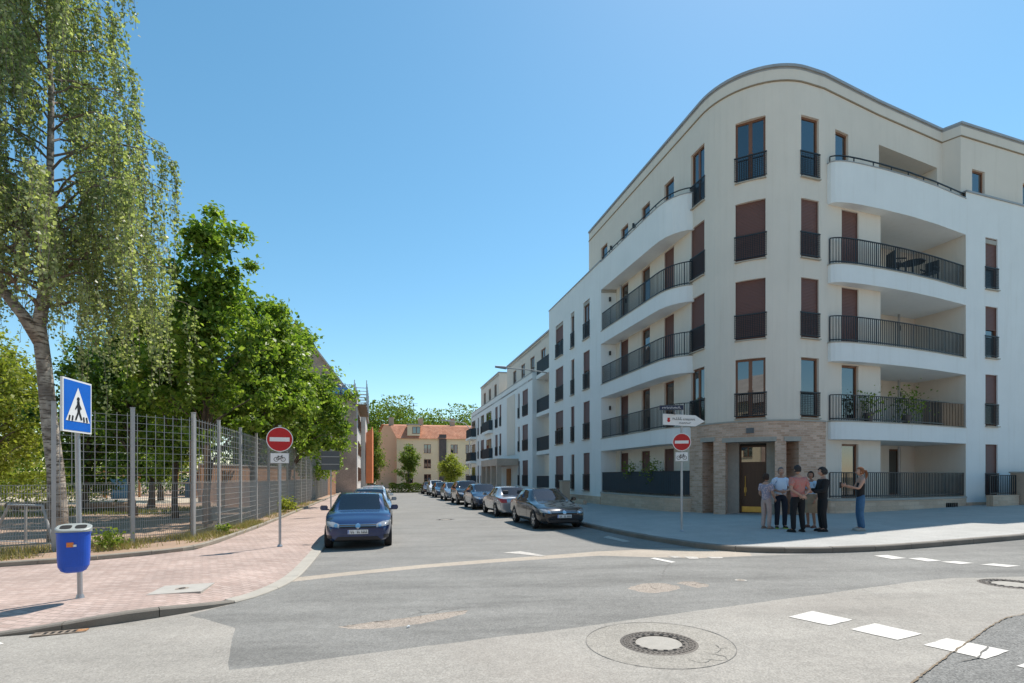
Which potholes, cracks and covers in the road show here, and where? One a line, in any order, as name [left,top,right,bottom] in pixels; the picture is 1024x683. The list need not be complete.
manhole cover [620,631,698,656]
crack [910,614,1022,683]
drain grate [29,628,89,637]
crack [586,622,737,669]
utility cover [147,583,215,595]
manhole cover [977,579,1024,589]
